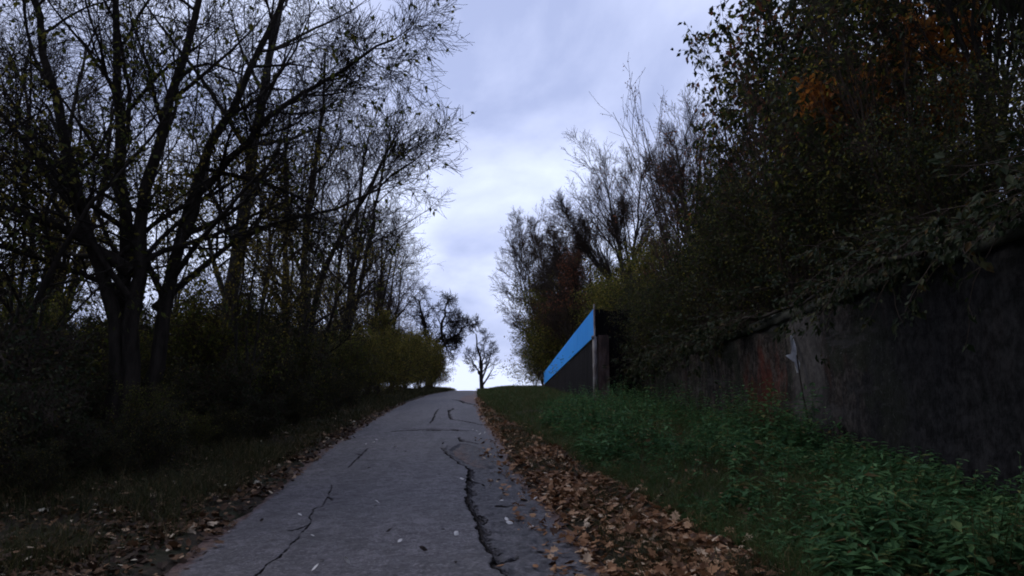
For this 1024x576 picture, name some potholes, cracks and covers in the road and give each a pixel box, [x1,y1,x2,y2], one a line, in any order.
crack [391,400,519,576]
crack [254,485,333,576]
